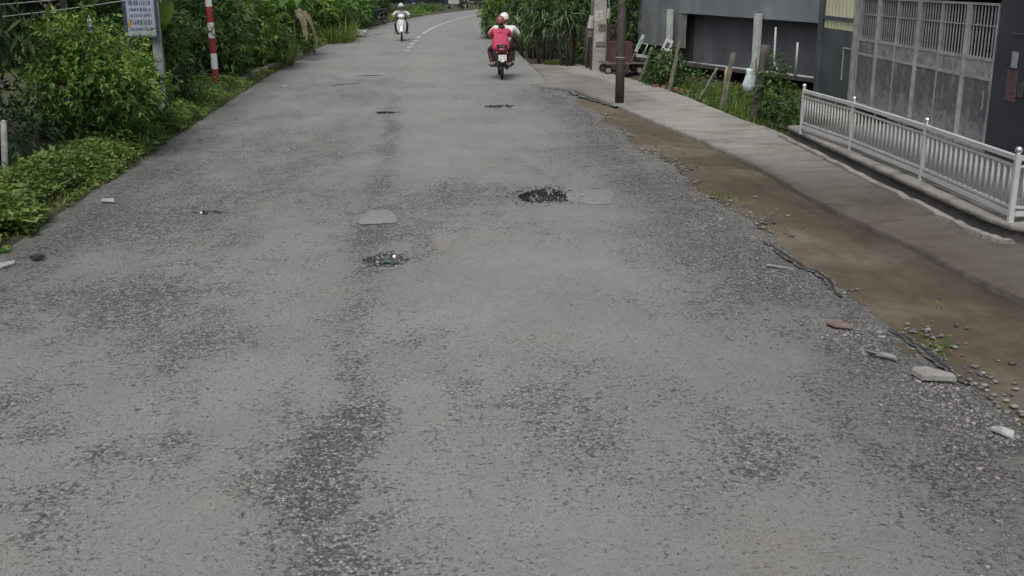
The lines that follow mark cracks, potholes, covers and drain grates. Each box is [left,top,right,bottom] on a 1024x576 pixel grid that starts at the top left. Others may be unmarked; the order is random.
pothole [506,185,594,206]
crack [535,86,612,106]
crack [763,241,845,297]
pothole [351,250,422,271]
crack [889,328,971,384]
